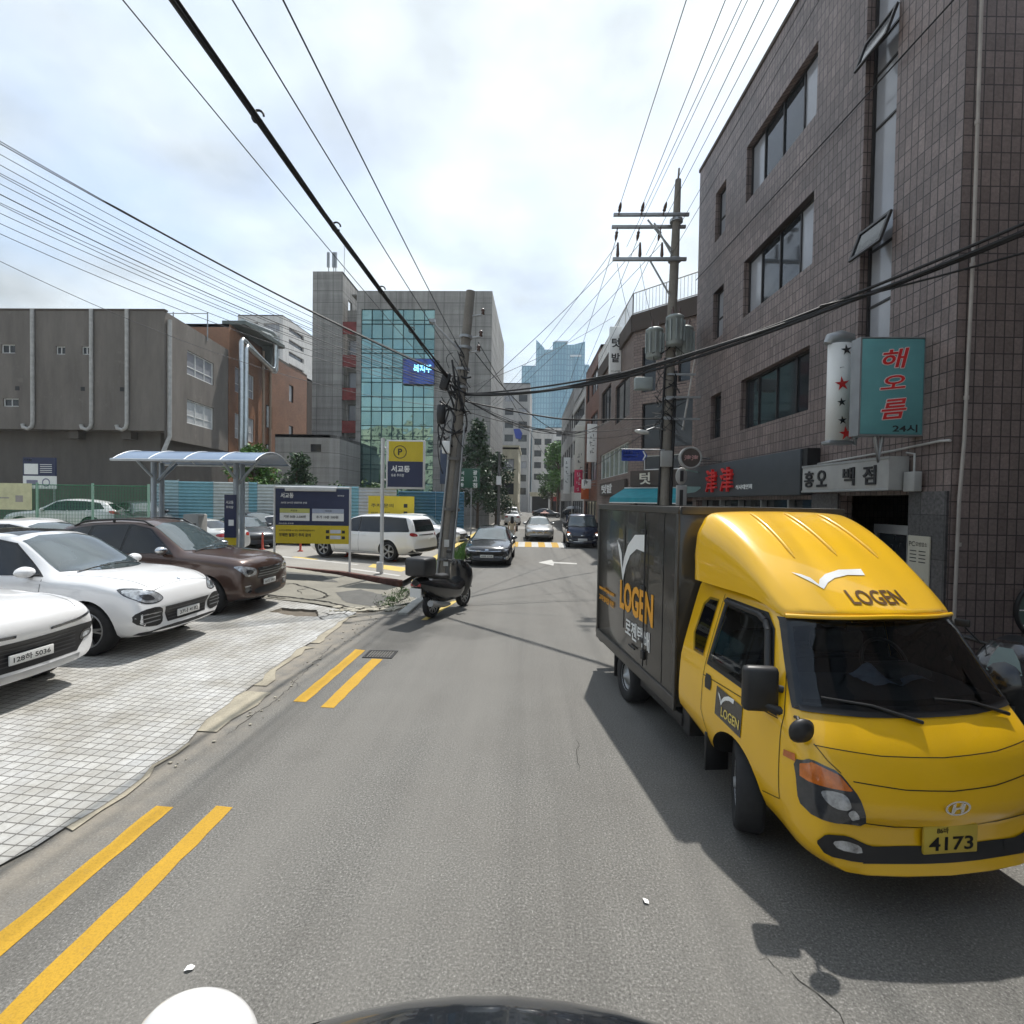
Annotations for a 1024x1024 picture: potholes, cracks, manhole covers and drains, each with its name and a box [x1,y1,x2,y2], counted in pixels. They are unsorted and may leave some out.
crack [760,957,844,1023]
crack [267,583,410,619]
drain grate [362,650,398,659]
